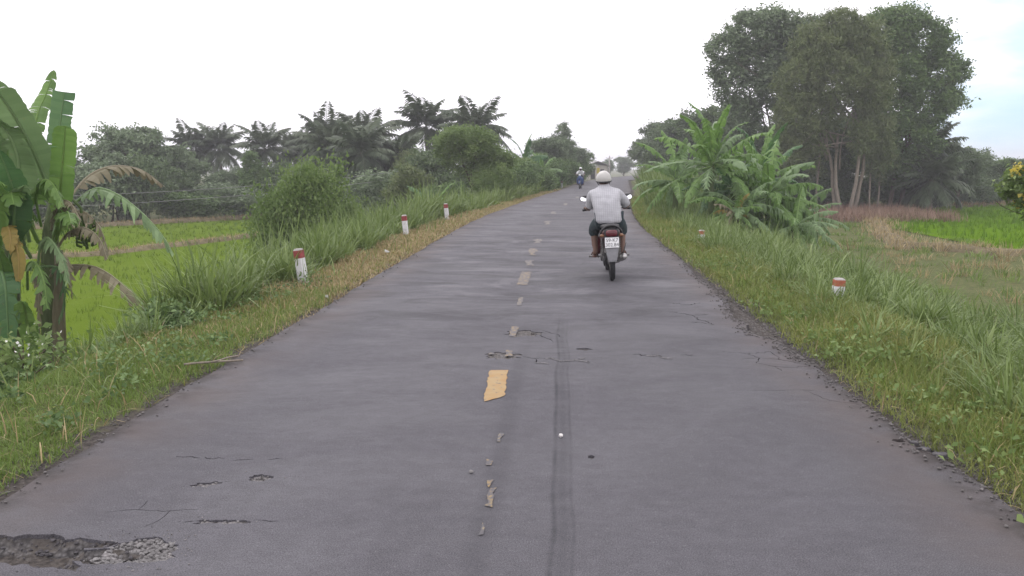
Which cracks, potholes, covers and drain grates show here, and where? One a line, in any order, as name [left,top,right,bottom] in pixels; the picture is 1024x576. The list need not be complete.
pothole [0,526,152,572]
pothole [77,530,200,576]
crack [535,357,589,365]
